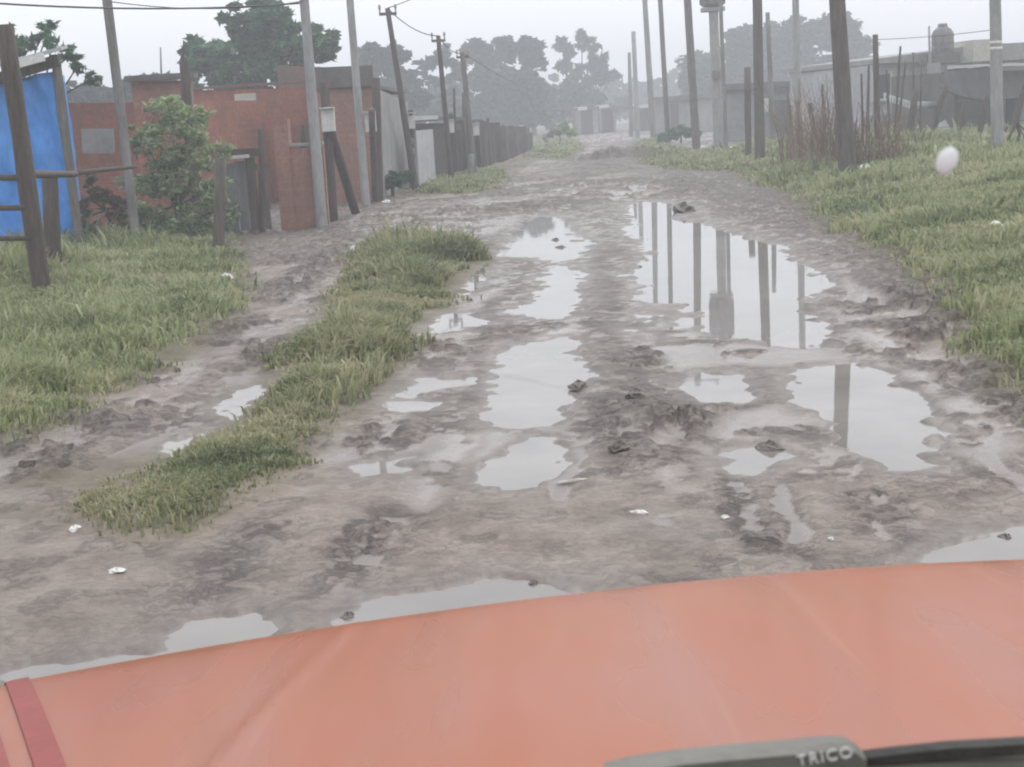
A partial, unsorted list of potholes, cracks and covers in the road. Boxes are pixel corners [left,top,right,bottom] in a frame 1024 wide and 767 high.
pothole [646,365,769,406]
pothole [454,426,590,493]
pothole [359,394,456,415]
pothole [481,213,612,266]
pothole [303,563,610,630]
pothole [494,262,608,323]
pothole [457,332,616,437]
pothole [369,367,497,402]
pothole [749,355,973,474]
pothole [196,373,286,424]
pothole [594,199,854,351]
